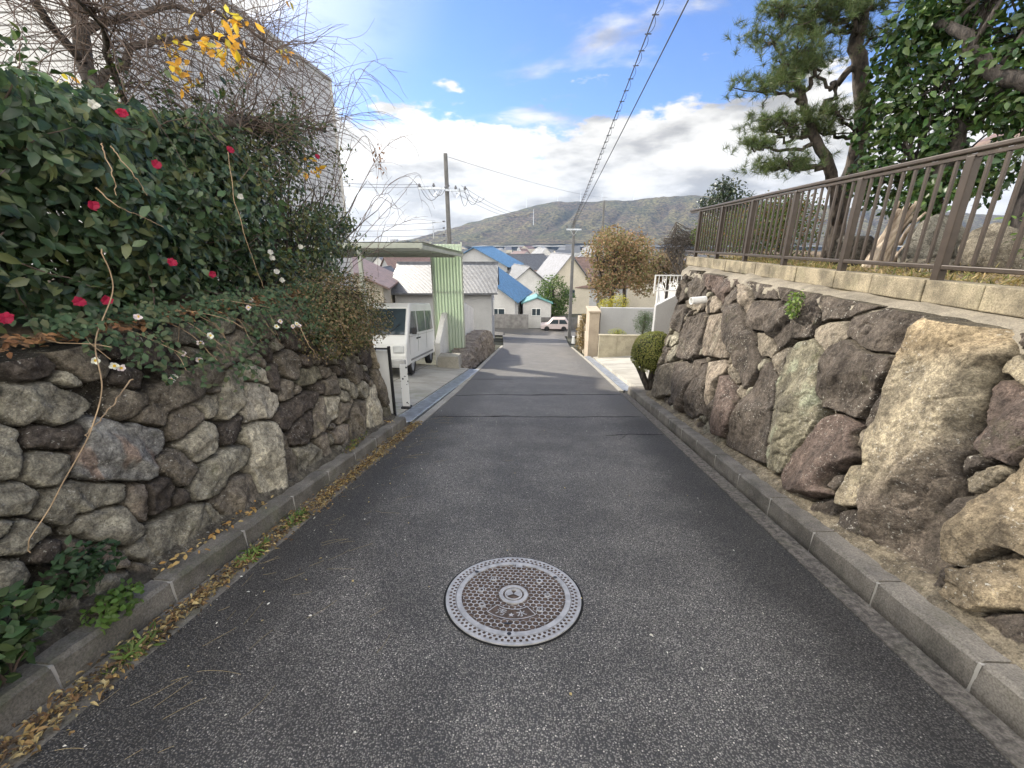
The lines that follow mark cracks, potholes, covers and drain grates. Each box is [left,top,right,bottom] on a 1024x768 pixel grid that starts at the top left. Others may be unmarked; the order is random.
manhole cover [443,557,584,648]
